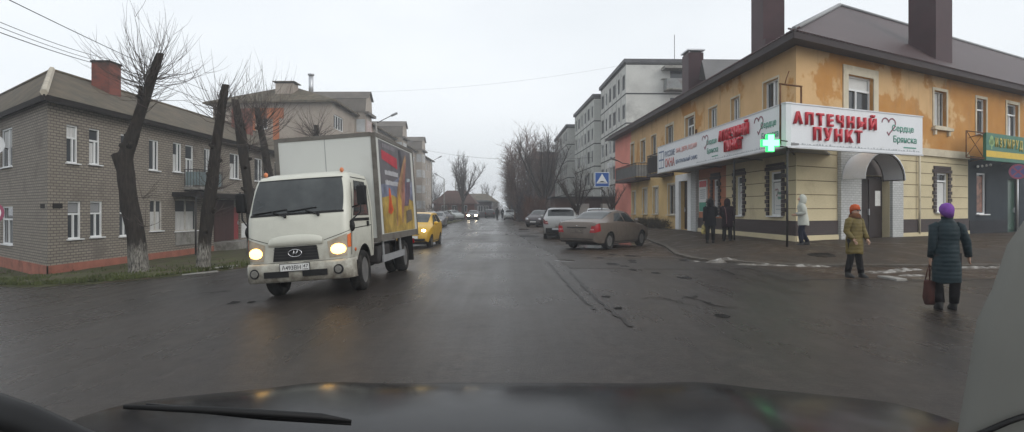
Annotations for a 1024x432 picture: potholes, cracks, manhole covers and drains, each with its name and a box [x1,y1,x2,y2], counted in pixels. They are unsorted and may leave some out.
crack [547,261,725,326]
